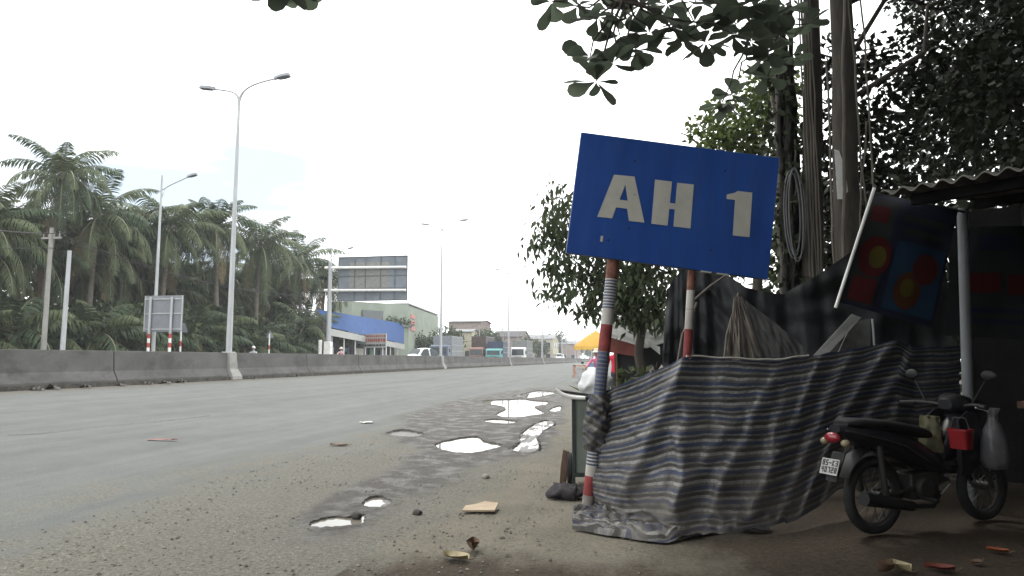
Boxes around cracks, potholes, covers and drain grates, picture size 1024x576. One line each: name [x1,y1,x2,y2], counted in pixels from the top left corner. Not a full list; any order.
pothole [510,419,556,454]
pothole [296,512,379,530]
pothole [380,429,429,437]
pothole [480,398,549,418]
pothole [428,435,509,454]
pothole [350,493,403,510]
